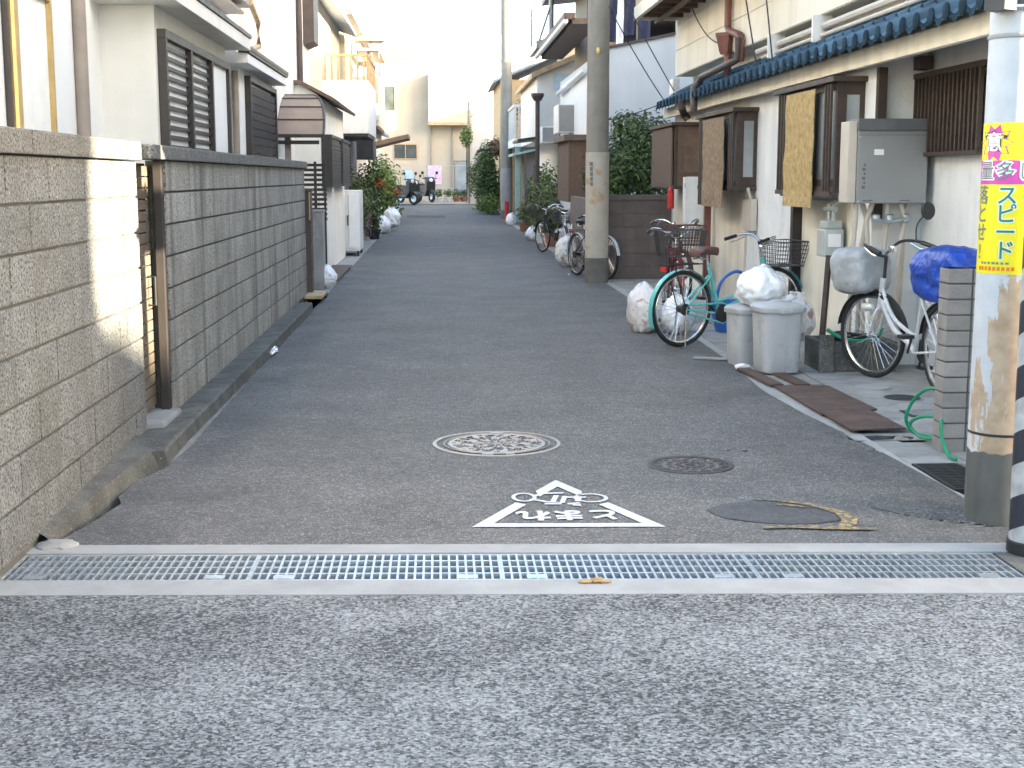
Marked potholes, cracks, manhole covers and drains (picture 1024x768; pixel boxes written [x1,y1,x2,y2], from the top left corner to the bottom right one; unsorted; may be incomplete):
drain grate [741,553,1024,579]
drain grate [0,555,260,581]
manhole cover [432,431,561,457]
drain grate [248,554,503,580]
manhole cover [881,394,924,402]
drain grate [912,463,966,494]
drain grate [499,553,761,580]
manhole cover [647,455,734,474]
